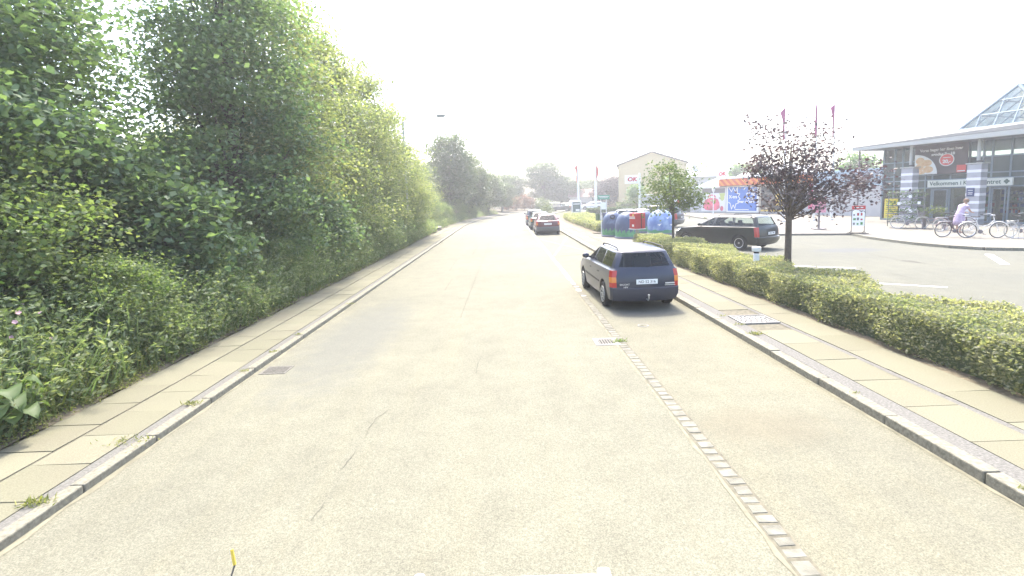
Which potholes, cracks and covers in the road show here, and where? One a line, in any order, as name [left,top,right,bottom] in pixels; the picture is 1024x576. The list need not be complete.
drain grate [258,366,294,375]
drain grate [592,338,621,346]
